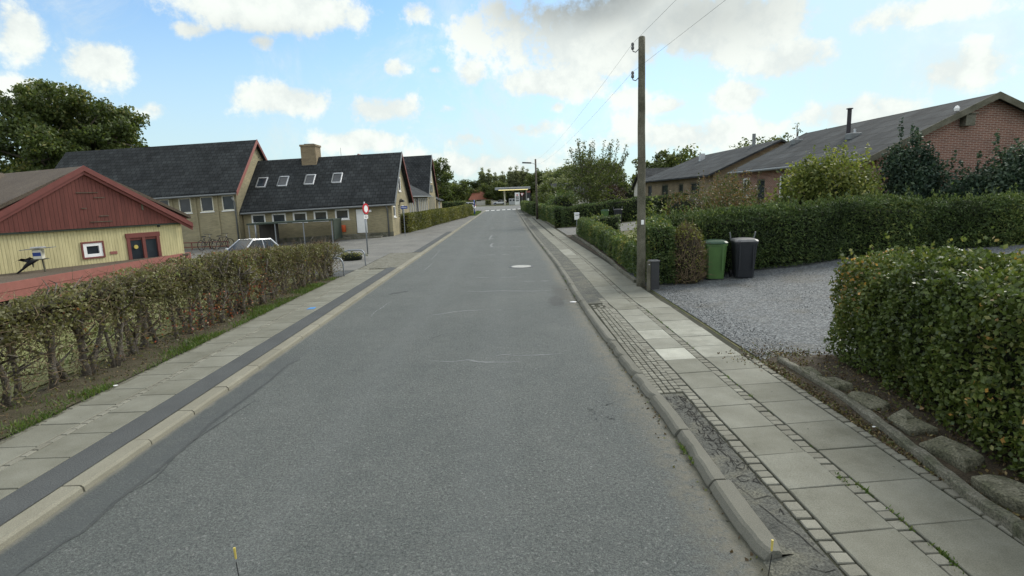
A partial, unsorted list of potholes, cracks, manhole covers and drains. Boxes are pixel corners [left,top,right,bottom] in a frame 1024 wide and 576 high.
crack [442,353,561,363]
